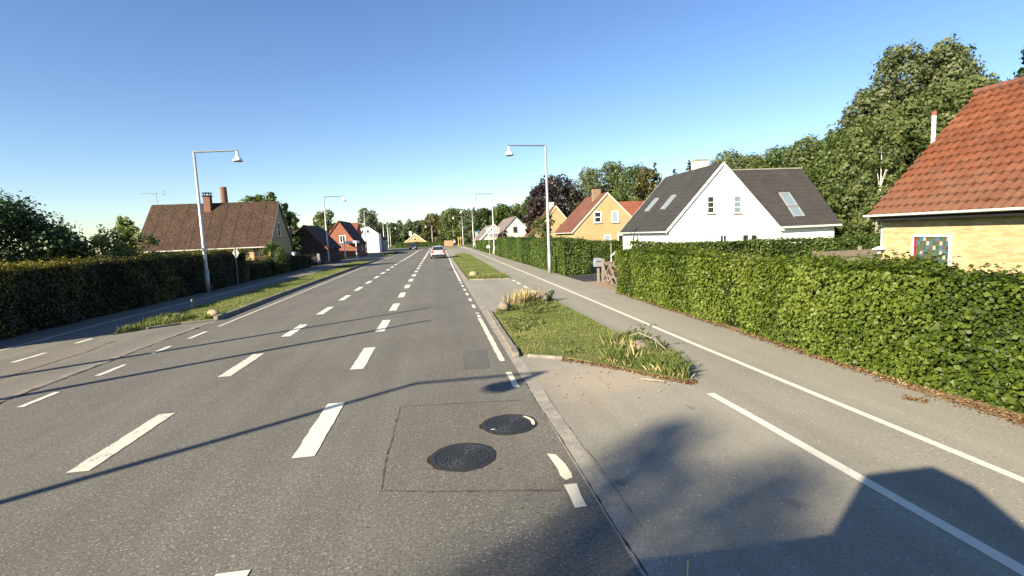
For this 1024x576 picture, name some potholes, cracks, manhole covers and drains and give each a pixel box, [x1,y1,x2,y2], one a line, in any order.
manhole cover [427,443,496,472]
manhole cover [479,414,538,435]
